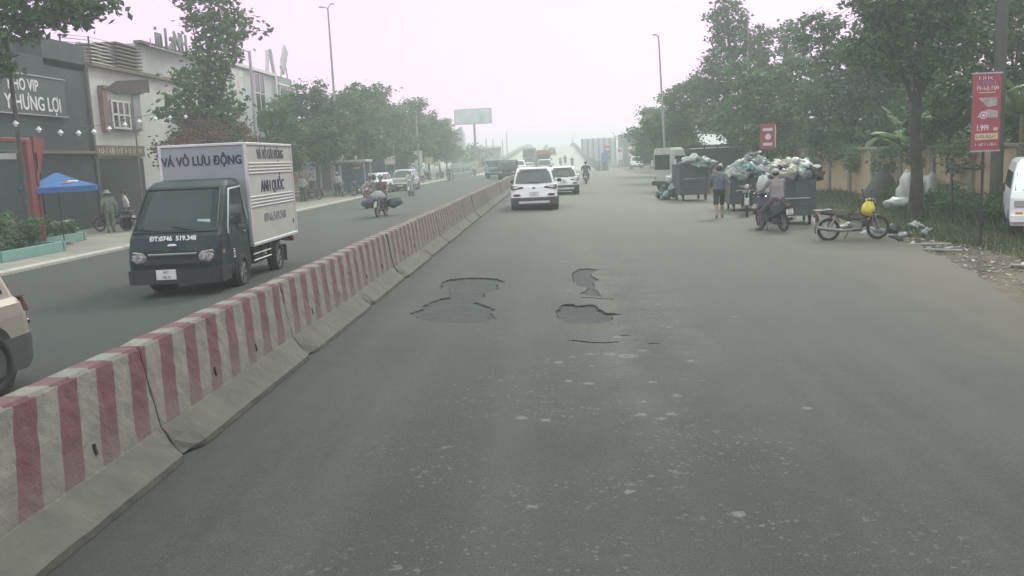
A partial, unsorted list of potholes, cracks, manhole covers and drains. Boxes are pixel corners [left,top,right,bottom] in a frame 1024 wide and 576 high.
pothole [409,278,504,323]
pothole [572,268,602,297]
pothole [554,304,621,324]
crack [571,335,630,343]
